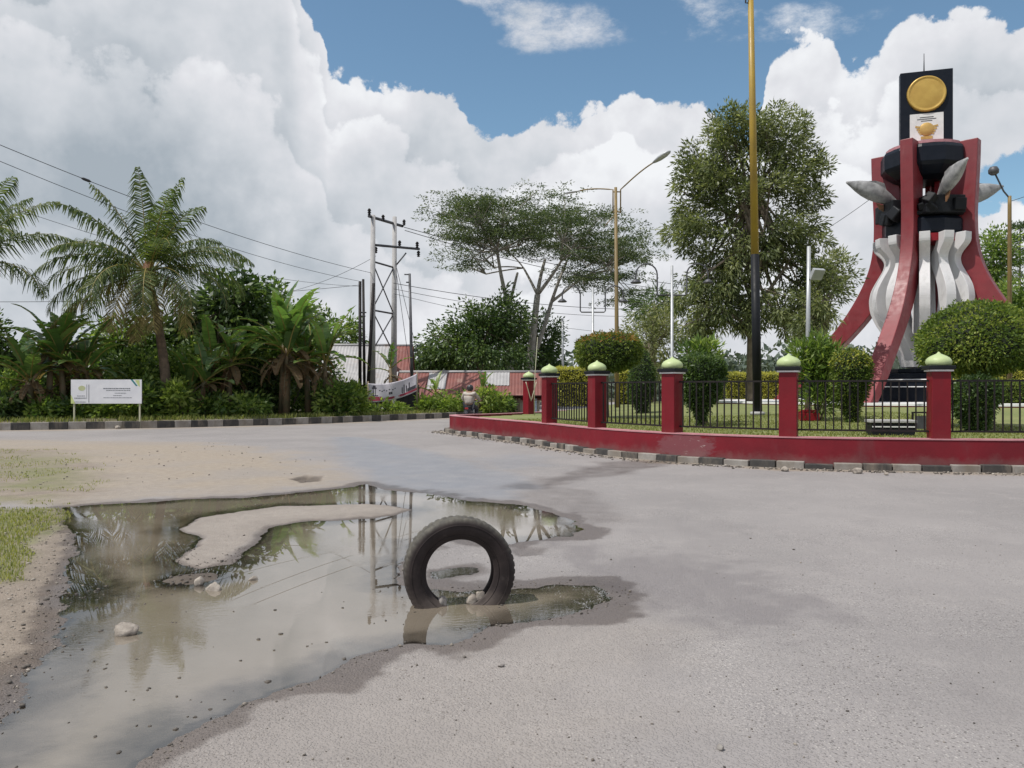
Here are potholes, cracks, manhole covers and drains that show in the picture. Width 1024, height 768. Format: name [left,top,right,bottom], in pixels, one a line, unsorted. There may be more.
pothole [286,474,327,483]
pothole [0,483,625,768]
